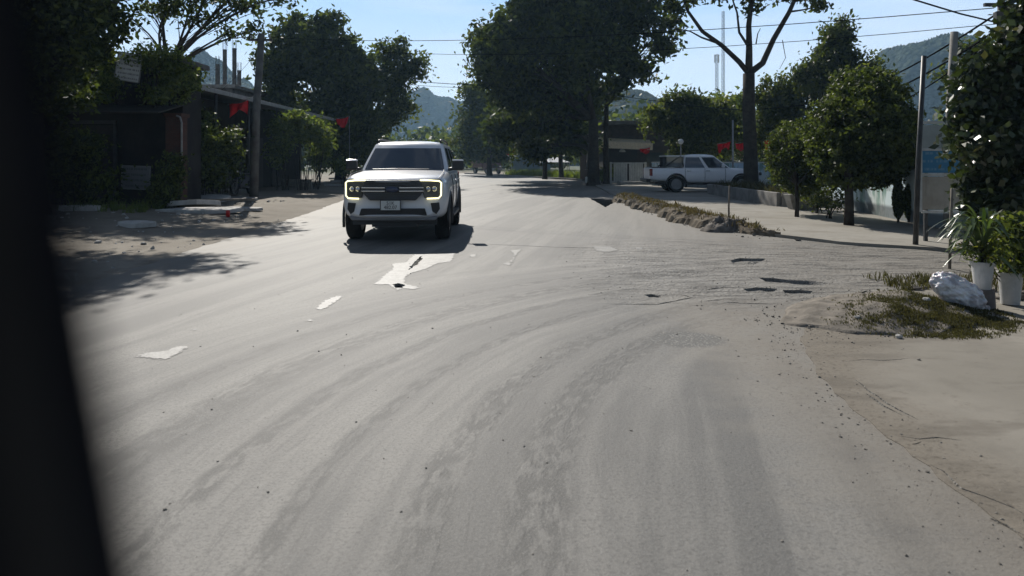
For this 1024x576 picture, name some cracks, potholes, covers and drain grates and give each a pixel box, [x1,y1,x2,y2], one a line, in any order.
crack [856,380,915,418]
crack [623,287,769,305]
crack [931,465,1024,535]
pothole [761,278,829,286]
